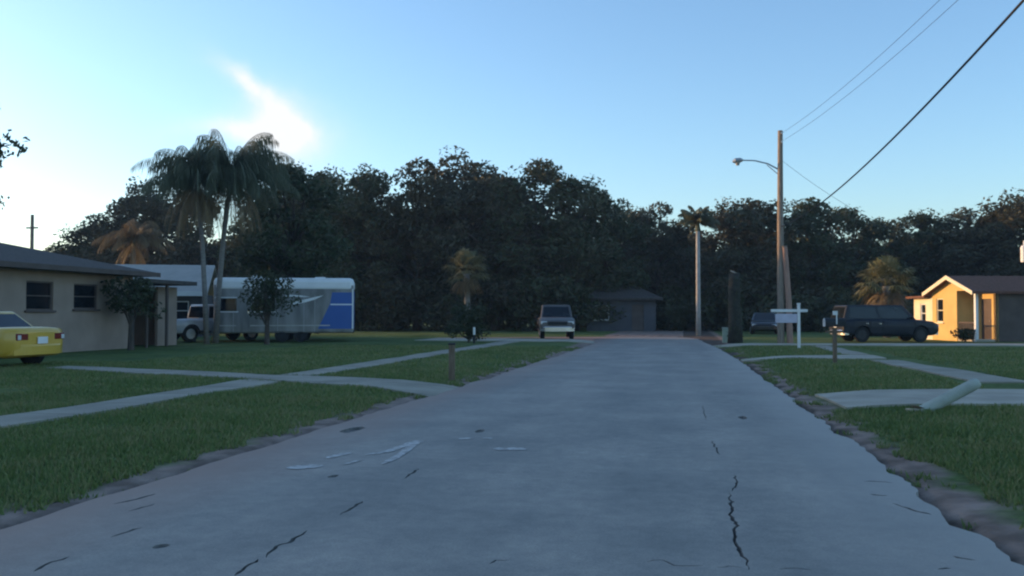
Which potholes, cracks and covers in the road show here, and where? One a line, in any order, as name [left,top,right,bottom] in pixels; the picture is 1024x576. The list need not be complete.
crack [34,528,139,571]
crack [234,468,419,576]
crack [871,481,932,515]
crack [648,407,808,570]
crack [115,494,154,511]
